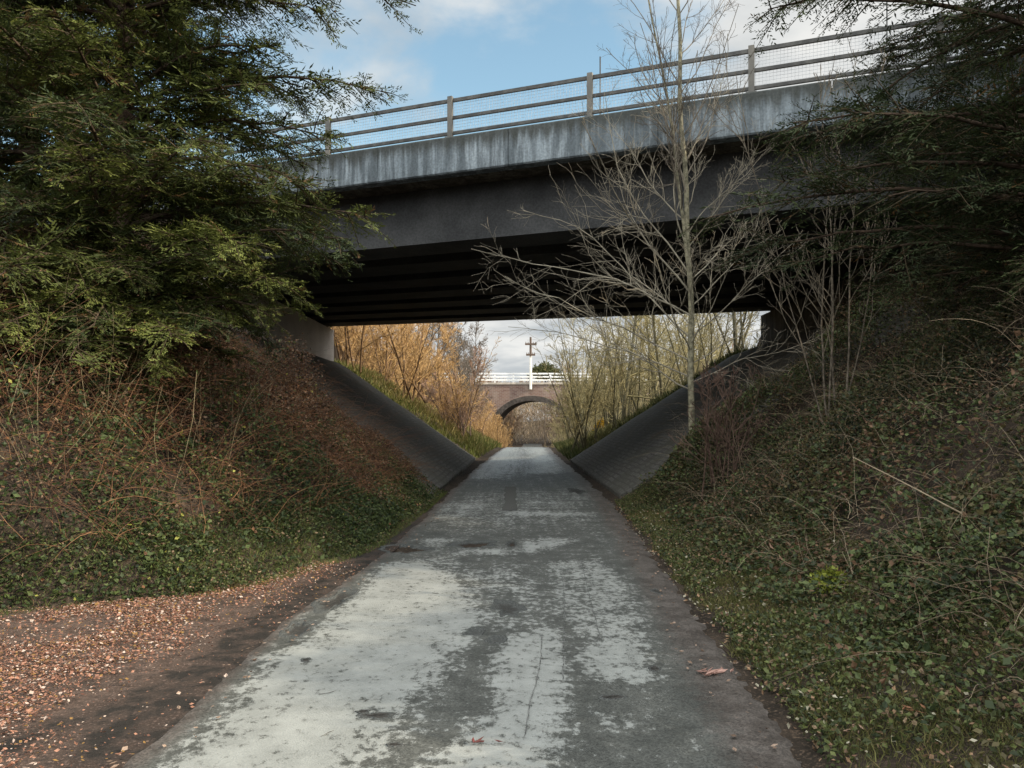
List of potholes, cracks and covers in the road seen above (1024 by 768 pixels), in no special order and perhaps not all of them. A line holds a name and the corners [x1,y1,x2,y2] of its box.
crack [524,634,543,736]
pothole [446,540,498,548]
pothole [378,543,436,554]
